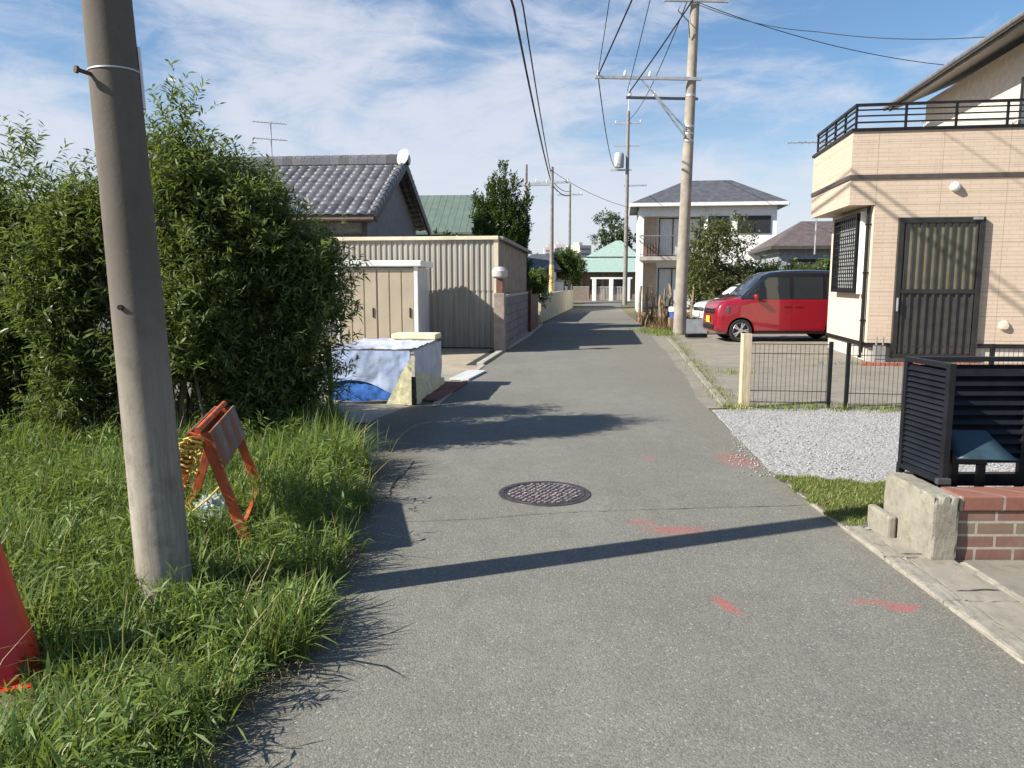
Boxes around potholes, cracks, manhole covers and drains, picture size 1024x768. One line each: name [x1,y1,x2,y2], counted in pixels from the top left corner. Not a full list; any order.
crack [375,460,415,499]
manhole cover [498,481,591,507]
